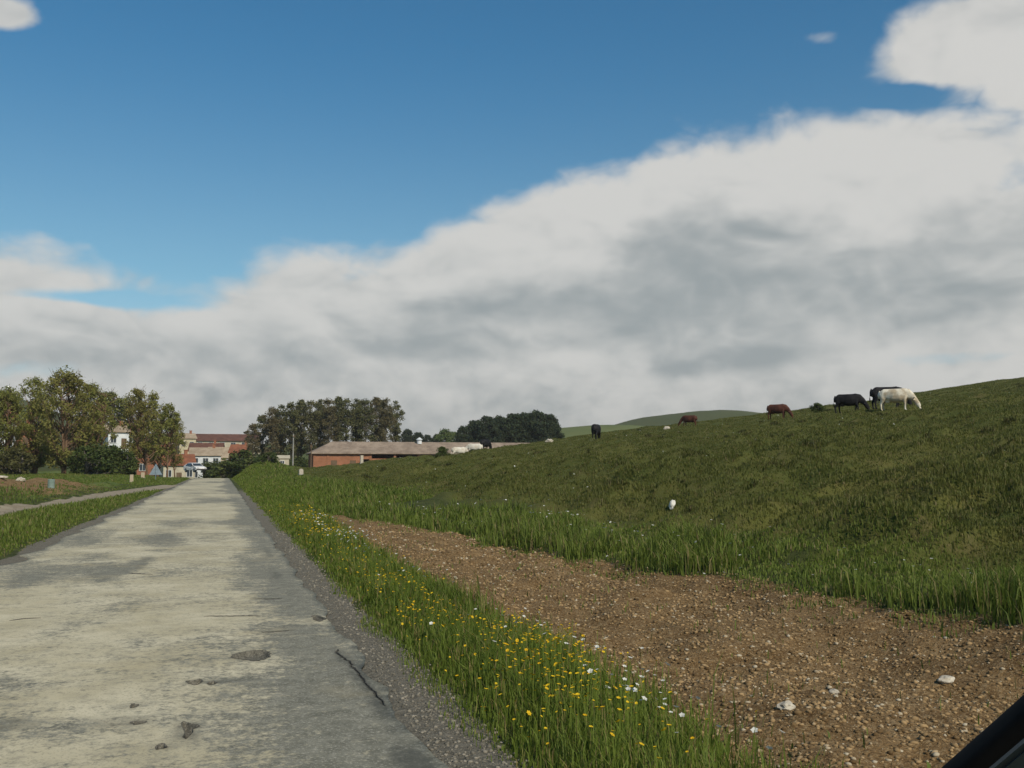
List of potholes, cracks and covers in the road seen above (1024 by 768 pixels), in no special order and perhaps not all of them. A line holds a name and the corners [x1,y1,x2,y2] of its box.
pothole [231,650,272,661]
pothole [181,721,200,739]
crack [335,649,386,706]
